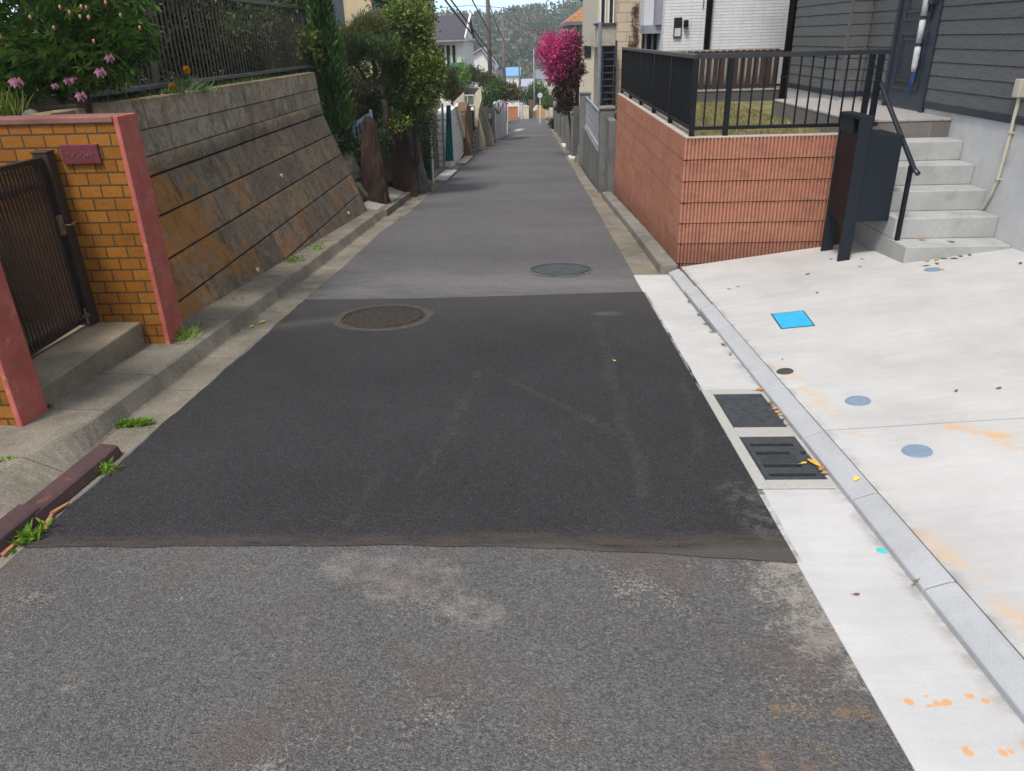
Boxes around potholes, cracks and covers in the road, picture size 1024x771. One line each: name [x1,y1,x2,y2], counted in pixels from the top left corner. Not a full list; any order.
manhole cover [528,262,593,277]
drain grate [739,437,827,480]
utility cover [845,396,871,406]
manhole cover [331,304,435,331]
utility cover [901,444,933,458]
